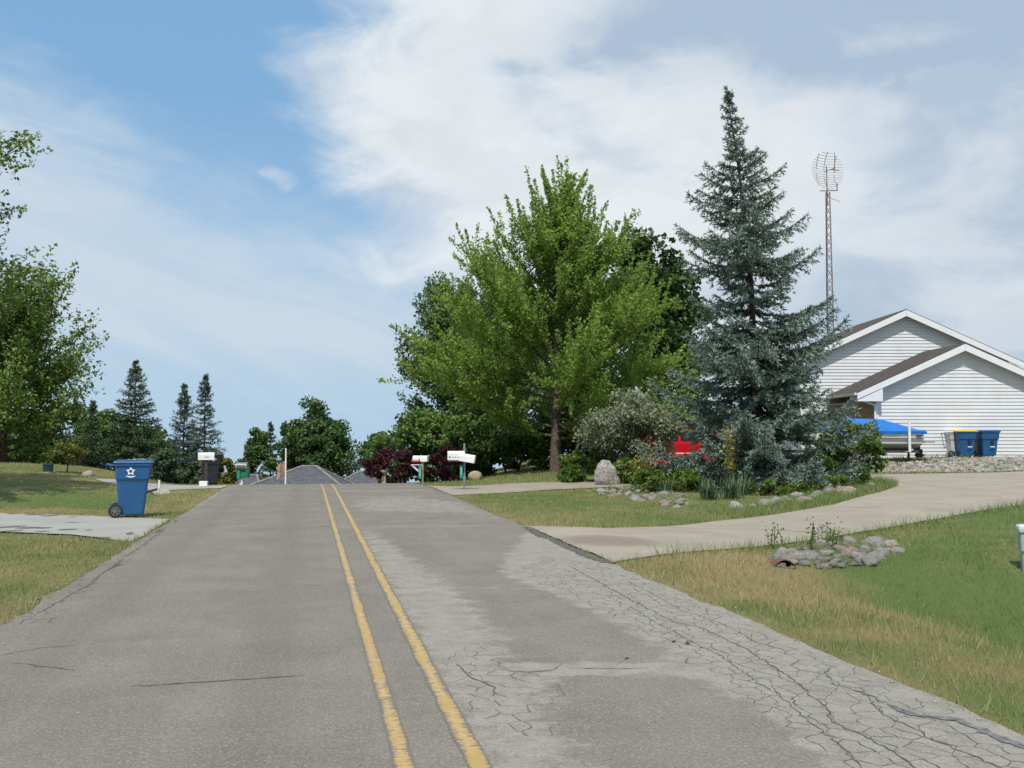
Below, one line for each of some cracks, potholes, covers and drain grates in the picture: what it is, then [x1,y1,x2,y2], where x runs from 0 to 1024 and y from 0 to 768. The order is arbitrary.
crack [132,675,299,686]
crack [441,648,628,736]
crack [520,558,1024,768]
